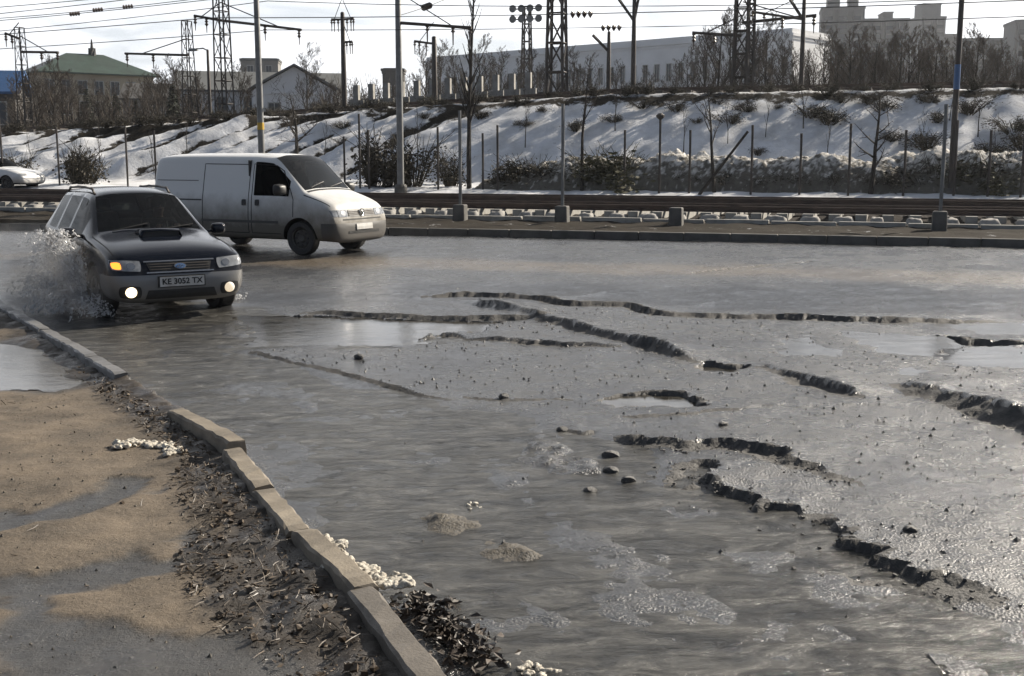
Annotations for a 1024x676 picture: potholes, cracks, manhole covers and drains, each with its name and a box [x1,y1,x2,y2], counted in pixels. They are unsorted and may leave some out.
pothole [790,513,1022,611]
pothole [242,314,506,346]
pothole [597,389,711,408]
pothole [694,361,751,372]
